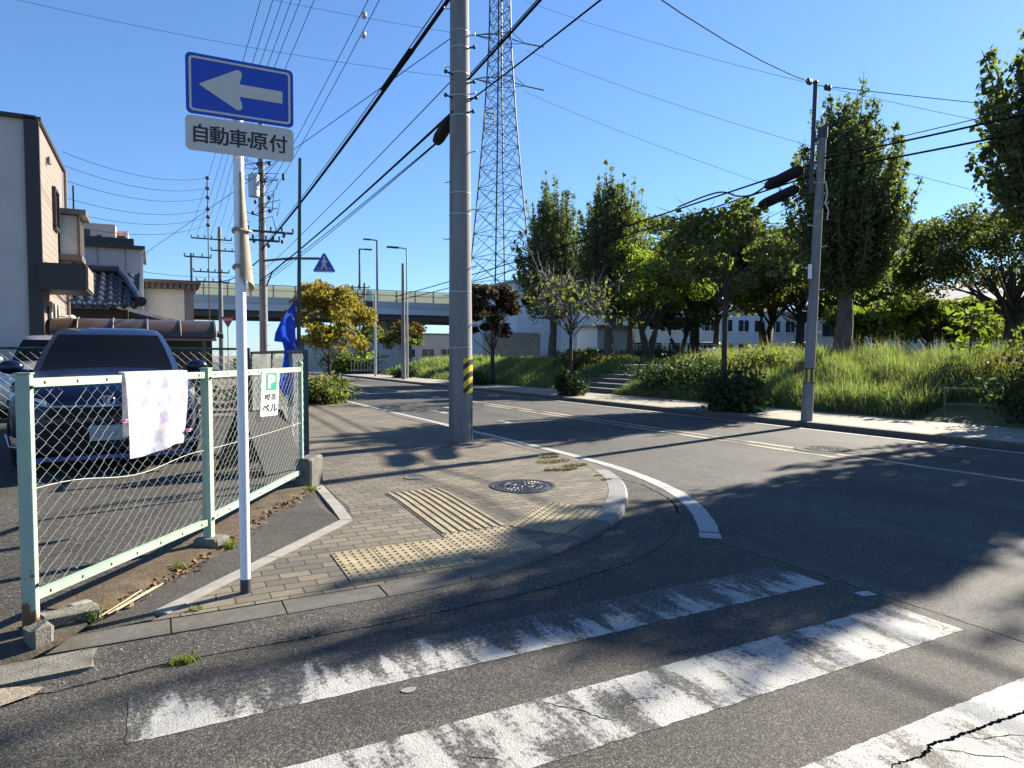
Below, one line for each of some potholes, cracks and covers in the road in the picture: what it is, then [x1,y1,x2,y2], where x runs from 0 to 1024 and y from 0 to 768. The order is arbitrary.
crack [891,710,1024,768]
manhole cover [794,445,864,453]
manhole cover [490,479,555,494]
crack [540,697,659,721]
crack [622,479,681,516]
